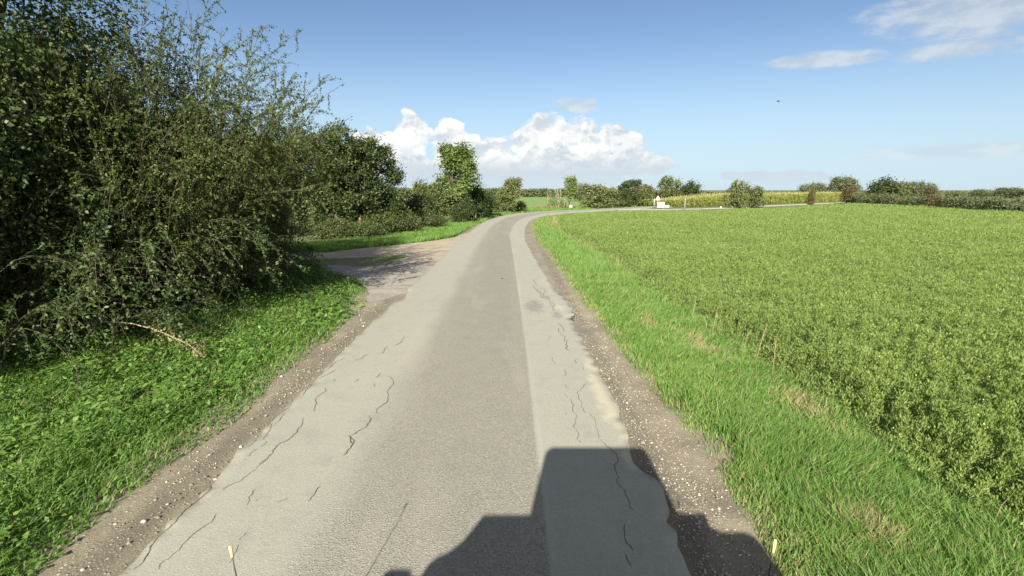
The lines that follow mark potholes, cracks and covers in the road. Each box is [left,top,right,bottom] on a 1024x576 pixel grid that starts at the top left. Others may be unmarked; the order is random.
crack [226,337,404,504]
crack [548,328,630,507]
crack [125,476,216,569]
